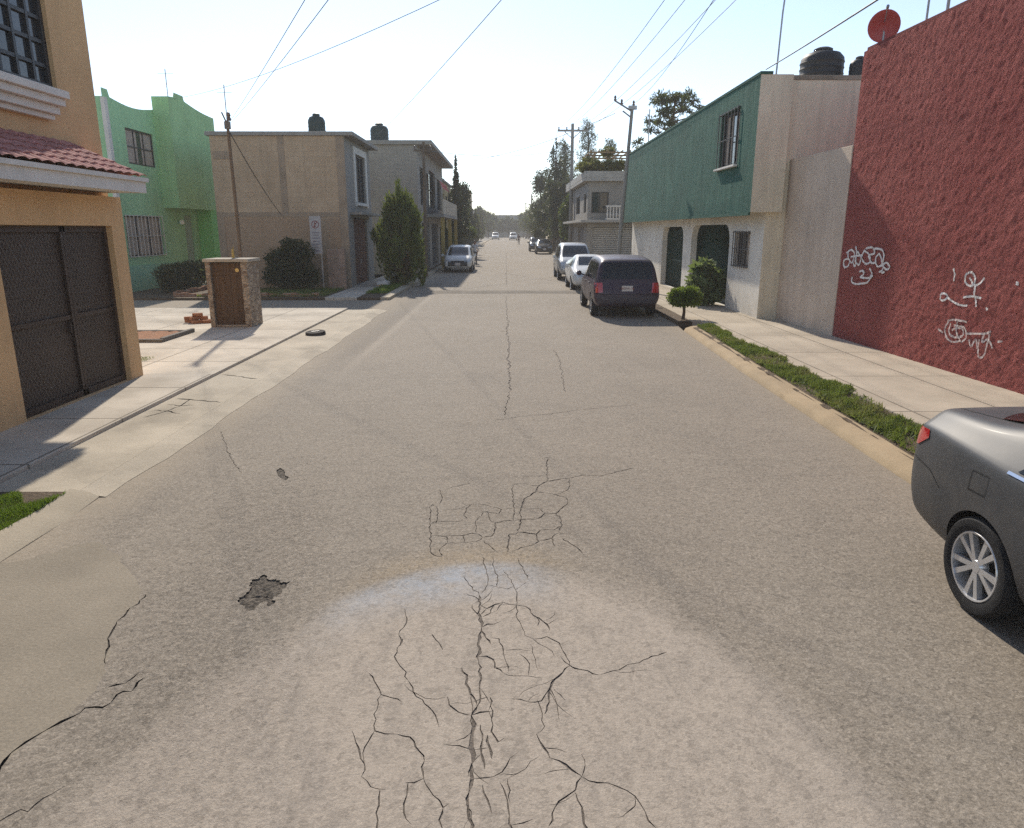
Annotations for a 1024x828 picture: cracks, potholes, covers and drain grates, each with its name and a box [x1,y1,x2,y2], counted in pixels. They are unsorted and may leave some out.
pothole [238,574,290,611]
crack [0,784,69,821]
crack [352,558,666,828]
crack [499,256,628,420]
crack [0,595,146,770]
